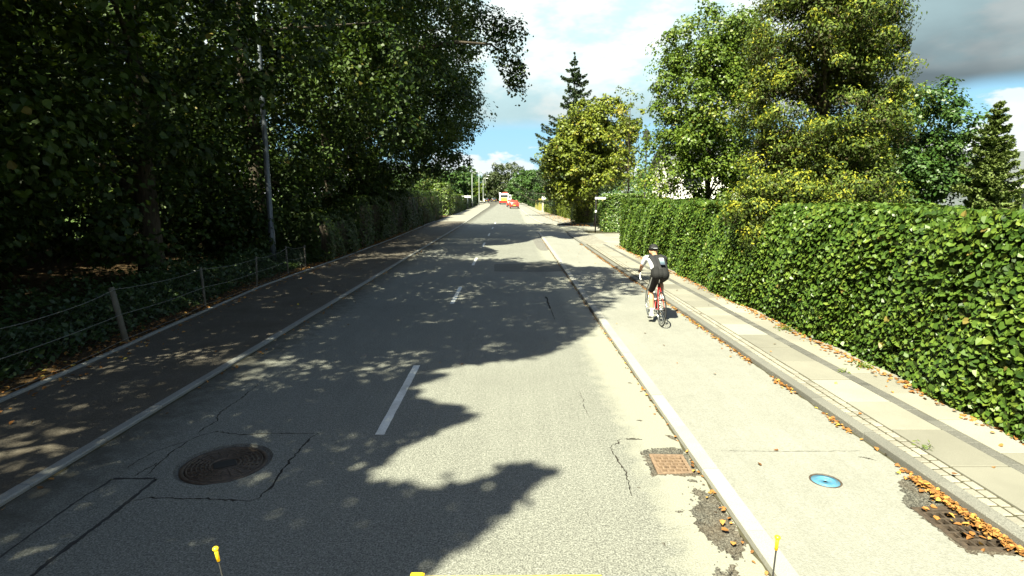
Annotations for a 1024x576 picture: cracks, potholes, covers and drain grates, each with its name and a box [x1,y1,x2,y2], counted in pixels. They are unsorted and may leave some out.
drain grate [897,477,1024,557]
manhole cover [809,473,843,488]
crack [127,382,318,501]
crack [611,438,642,496]
manhole cover [173,444,273,485]
drain grate [640,447,700,477]
